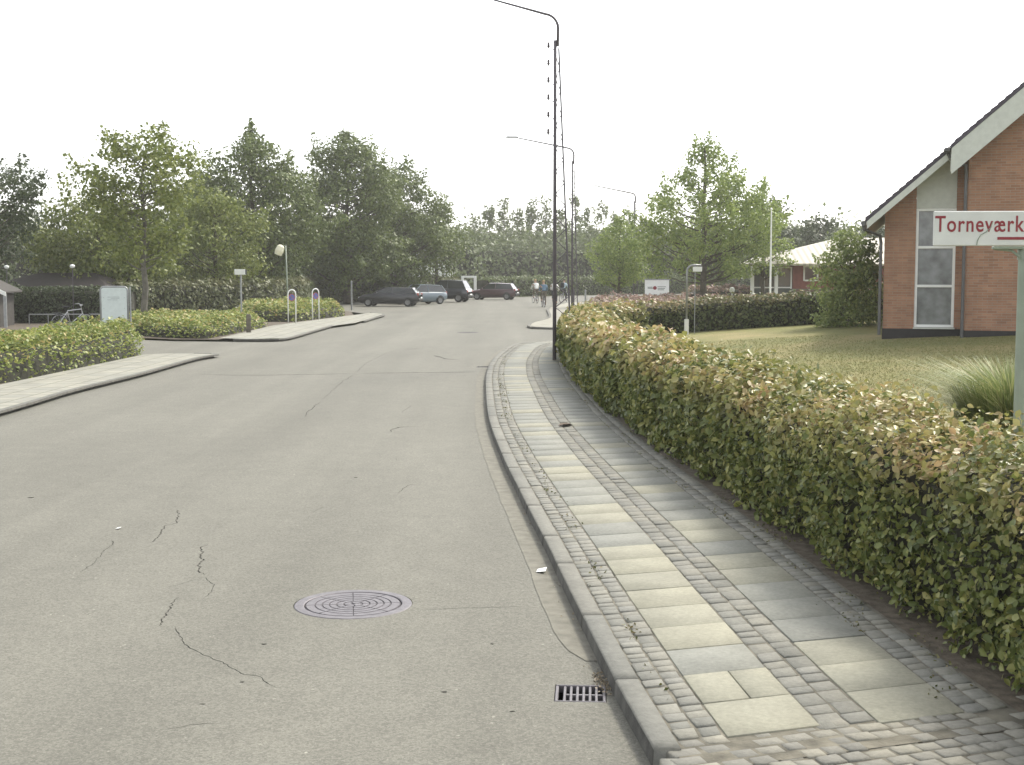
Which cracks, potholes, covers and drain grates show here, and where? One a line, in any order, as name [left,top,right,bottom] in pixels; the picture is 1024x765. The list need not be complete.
drain grate [554,684,607,703]
manhole cover [294,590,412,619]
crack [159,544,276,688]
